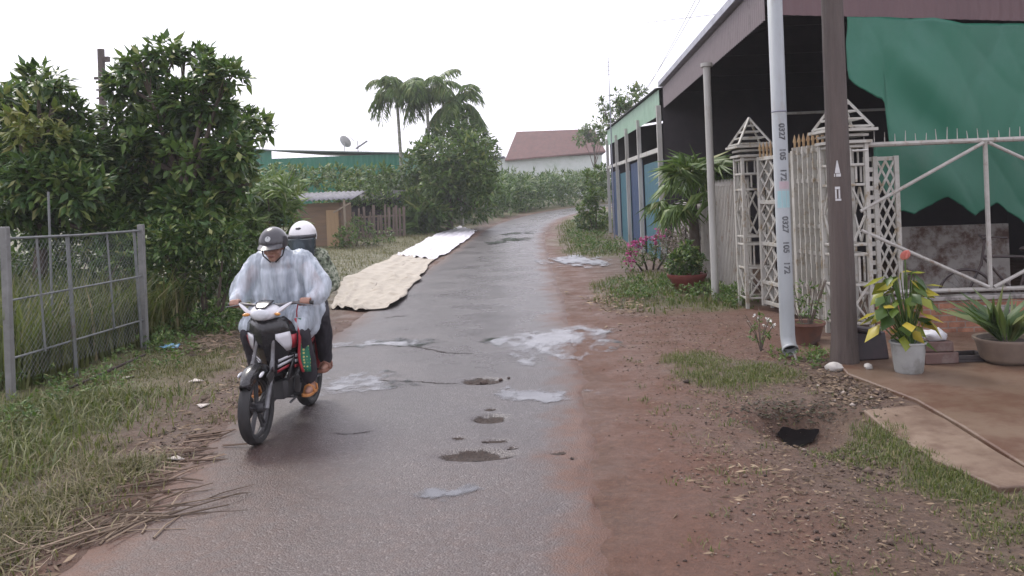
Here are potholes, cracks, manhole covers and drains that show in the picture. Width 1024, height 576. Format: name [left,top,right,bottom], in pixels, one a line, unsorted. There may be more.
pothole [473,415,504,424]
pothole [778,427,819,447]
pothole [439,450,512,462]
